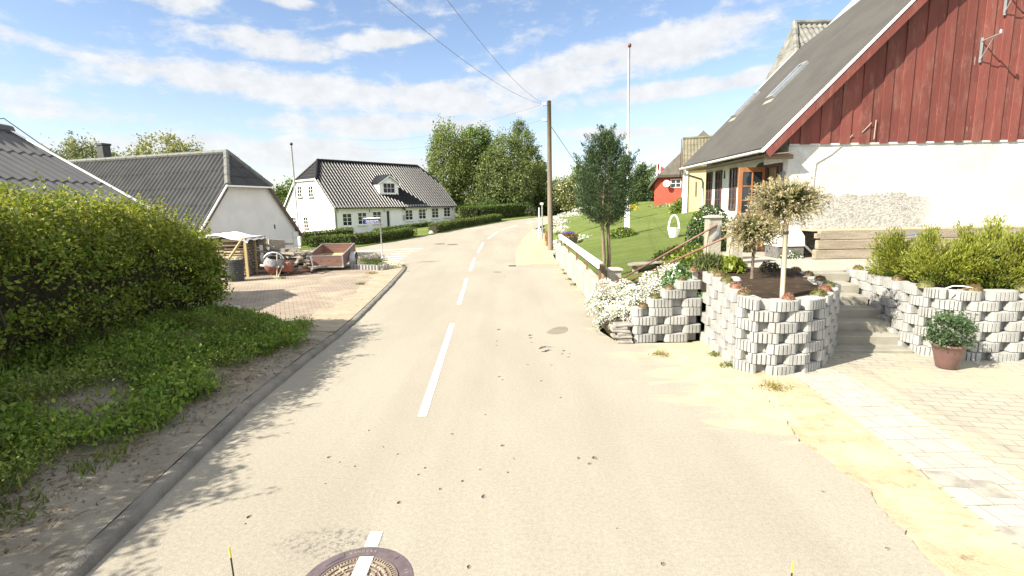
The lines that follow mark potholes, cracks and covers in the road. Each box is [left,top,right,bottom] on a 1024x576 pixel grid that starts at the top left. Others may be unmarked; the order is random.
manhole cover [306,547,414,576]
